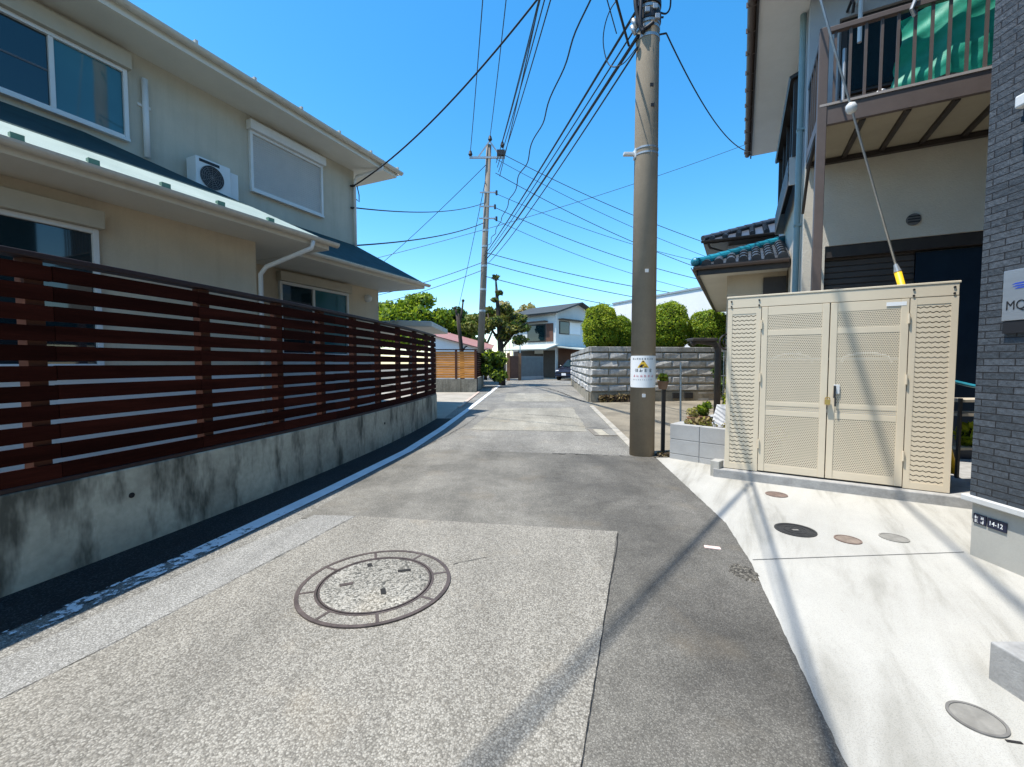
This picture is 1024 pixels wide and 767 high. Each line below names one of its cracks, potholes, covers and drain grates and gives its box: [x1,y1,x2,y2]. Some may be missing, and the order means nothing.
manhole cover [878,533,910,543]
manhole cover [294,550,451,629]
manhole cover [774,523,818,538]
manhole cover [834,535,863,545]
manhole cover [945,700,1011,739]
